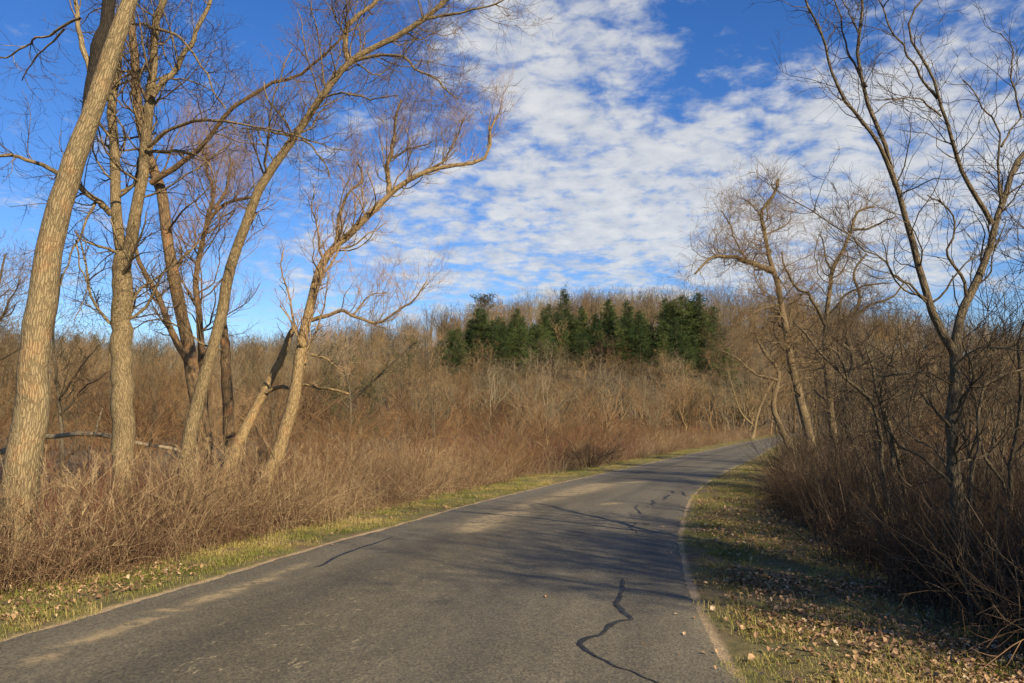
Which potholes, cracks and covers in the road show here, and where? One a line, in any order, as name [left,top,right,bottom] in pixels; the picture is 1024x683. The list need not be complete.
crack [628,490,686,534]
crack [316,537,392,567]
